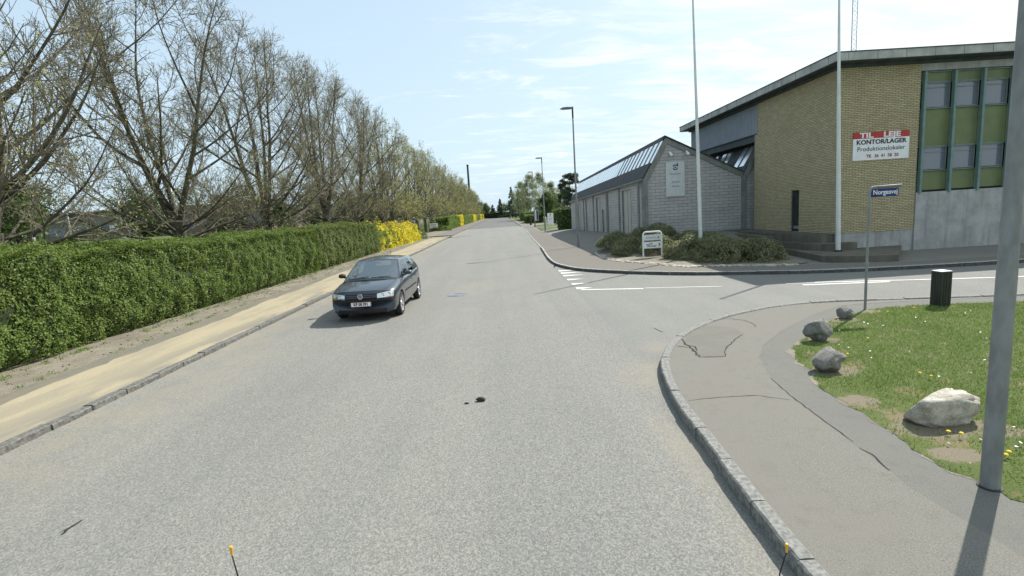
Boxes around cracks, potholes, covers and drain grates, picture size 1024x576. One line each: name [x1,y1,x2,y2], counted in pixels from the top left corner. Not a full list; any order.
crack [682,318,755,357]
crack [772,379,851,440]
